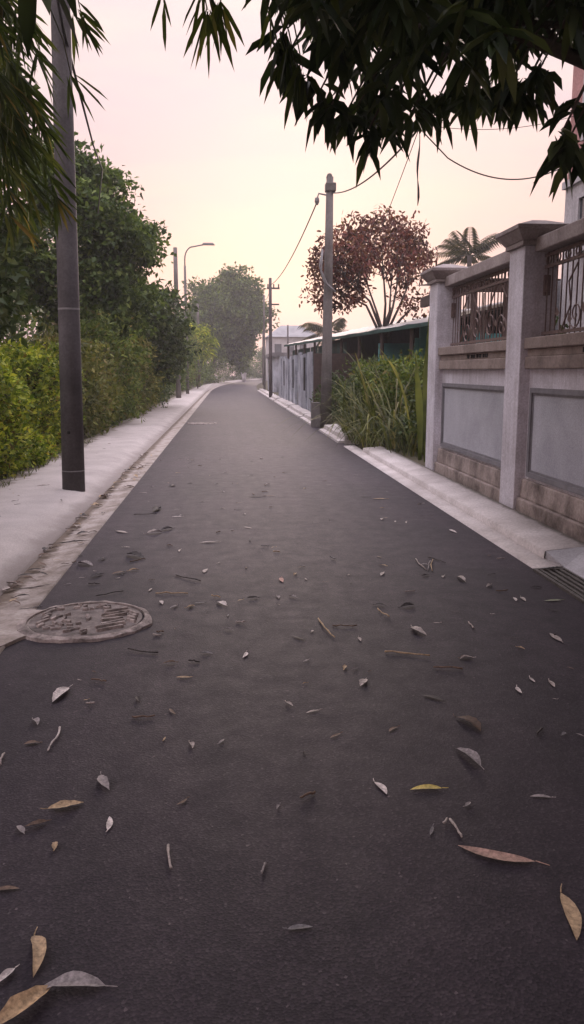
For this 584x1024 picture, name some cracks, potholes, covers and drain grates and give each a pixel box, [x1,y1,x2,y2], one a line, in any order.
drain grate [533,568,584,604]
manhole cover [16,600,153,643]
